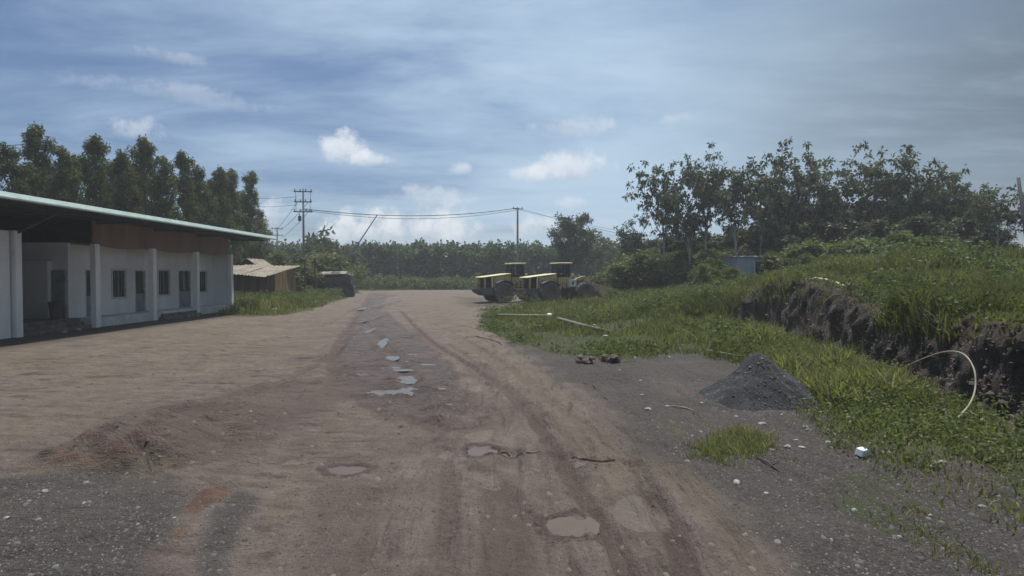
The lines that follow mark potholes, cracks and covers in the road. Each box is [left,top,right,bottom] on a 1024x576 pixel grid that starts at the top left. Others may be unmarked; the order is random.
pothole [316,463,380,478]
pothole [376,374,429,386]
pothole [530,507,603,542]
pothole [459,443,502,459]
pothole [352,384,426,399]
pothole [592,486,685,548]
